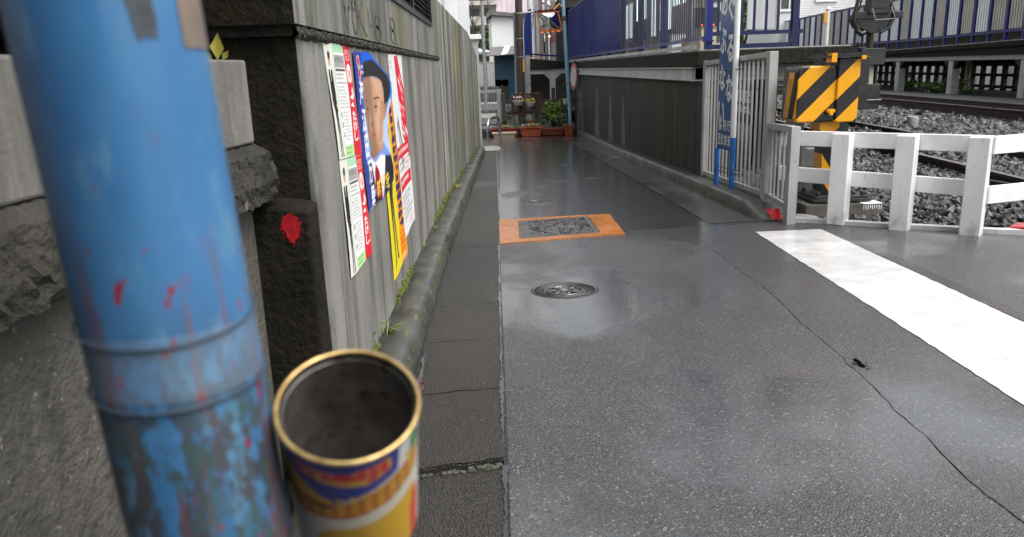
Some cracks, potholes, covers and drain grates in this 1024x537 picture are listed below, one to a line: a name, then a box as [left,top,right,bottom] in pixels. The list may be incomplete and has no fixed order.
manhole cover [531,282,599,299]
crack [628,222,1024,523]
